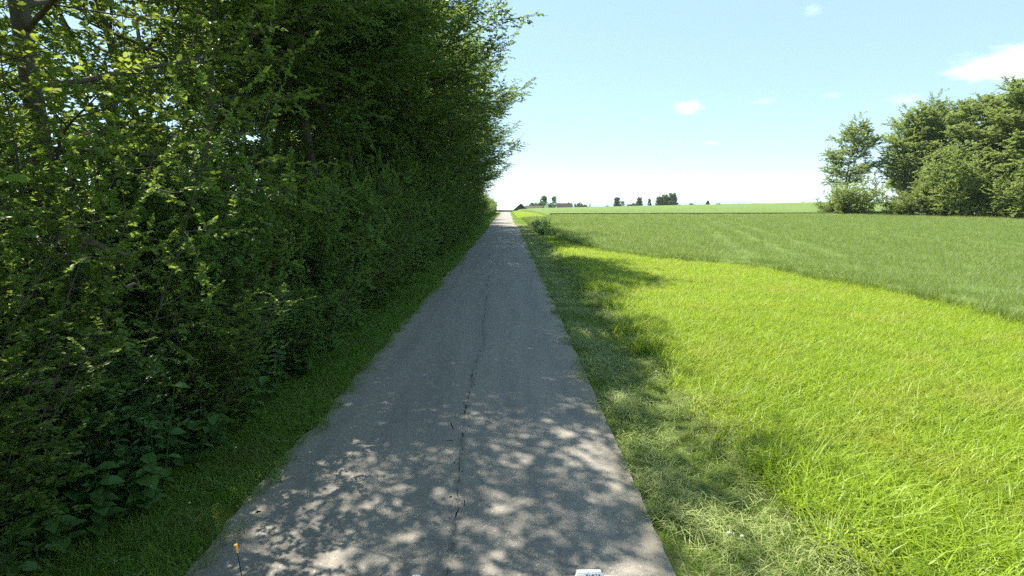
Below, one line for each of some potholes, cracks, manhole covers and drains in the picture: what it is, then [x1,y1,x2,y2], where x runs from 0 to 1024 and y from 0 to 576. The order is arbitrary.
crack [446,257,493,576]
